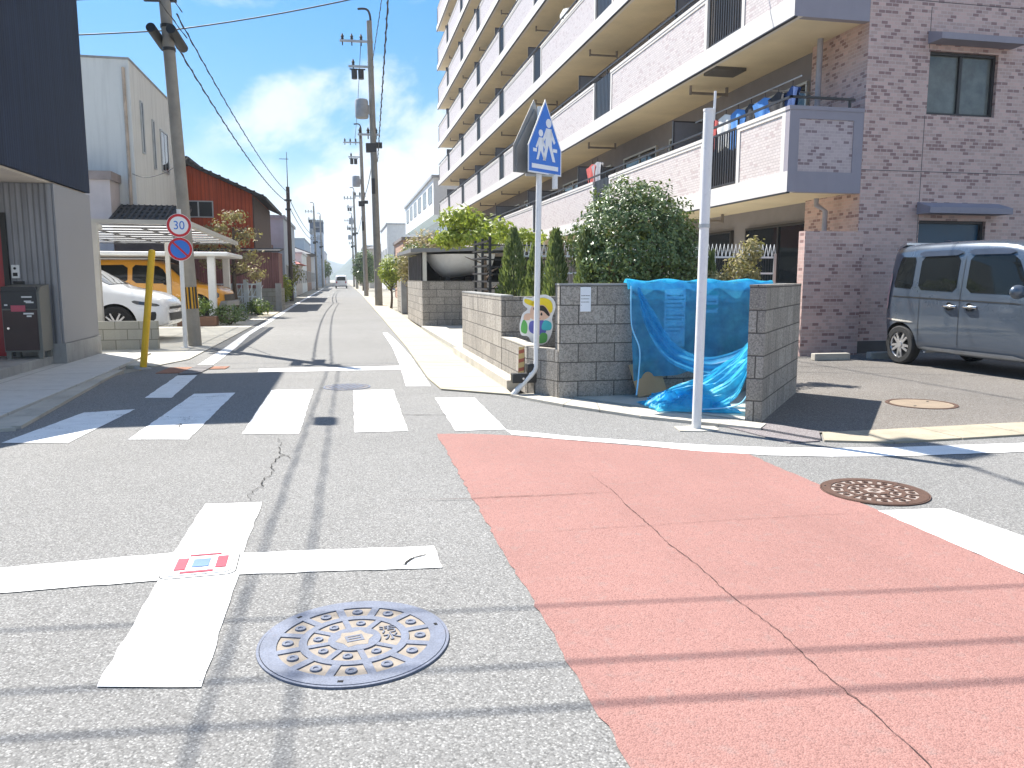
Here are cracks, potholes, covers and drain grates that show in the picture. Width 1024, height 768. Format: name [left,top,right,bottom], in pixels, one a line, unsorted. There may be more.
manhole cover [256,601,449,690]
manhole cover [820,478,931,506]
manhole cover [885,398,959,409]
